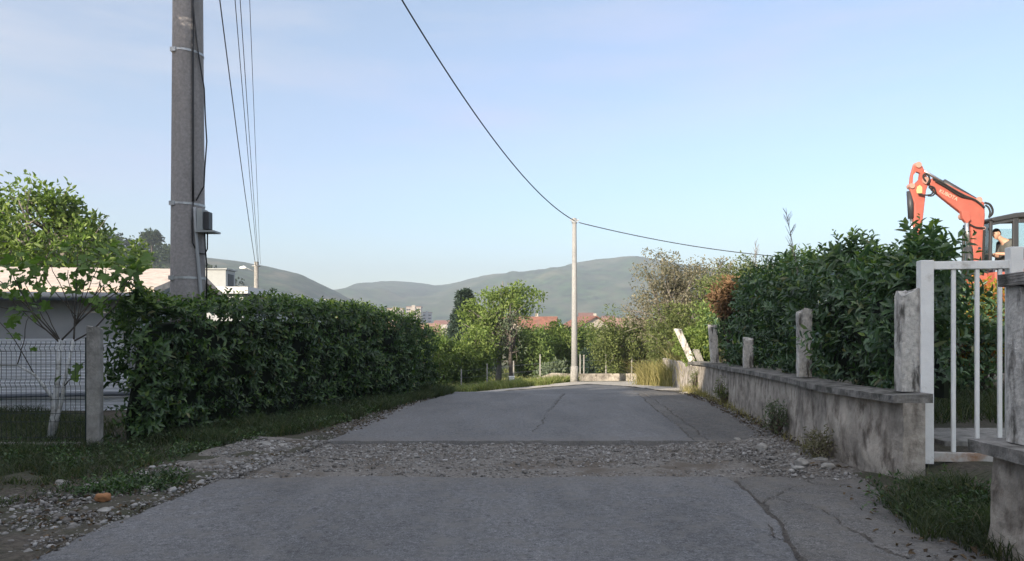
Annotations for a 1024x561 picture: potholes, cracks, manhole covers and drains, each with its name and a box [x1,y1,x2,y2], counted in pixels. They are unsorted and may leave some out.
crack [733,481,910,561]
